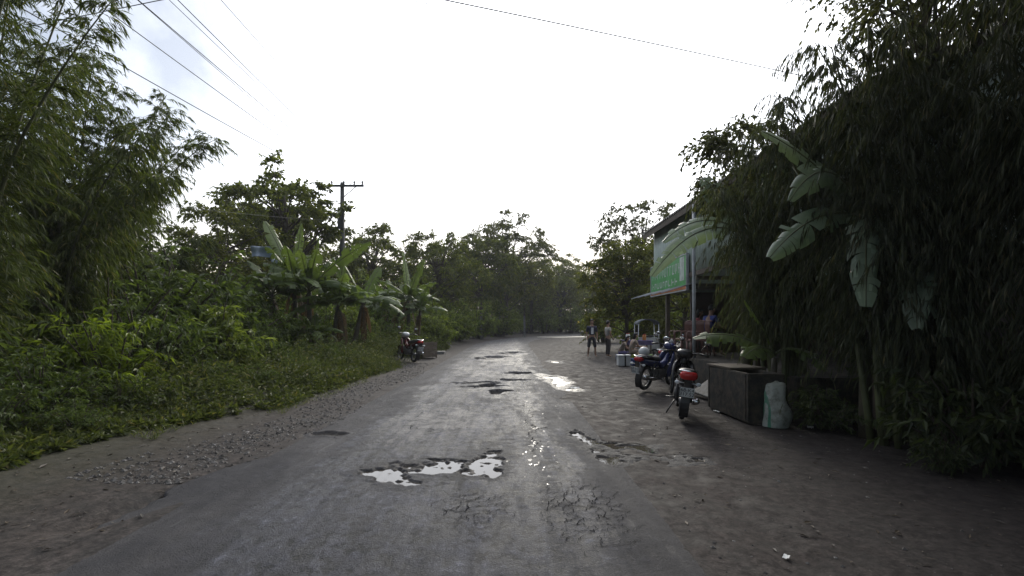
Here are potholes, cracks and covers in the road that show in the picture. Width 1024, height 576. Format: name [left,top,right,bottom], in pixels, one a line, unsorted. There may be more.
crack [431,489,527,531]
pothole [333,438,523,496]
pothole [303,430,356,438]
pothole [469,351,527,360]
crack [534,478,640,558]
pothole [444,371,539,397]
pothole [562,429,718,468]
pothole [533,373,587,392]
